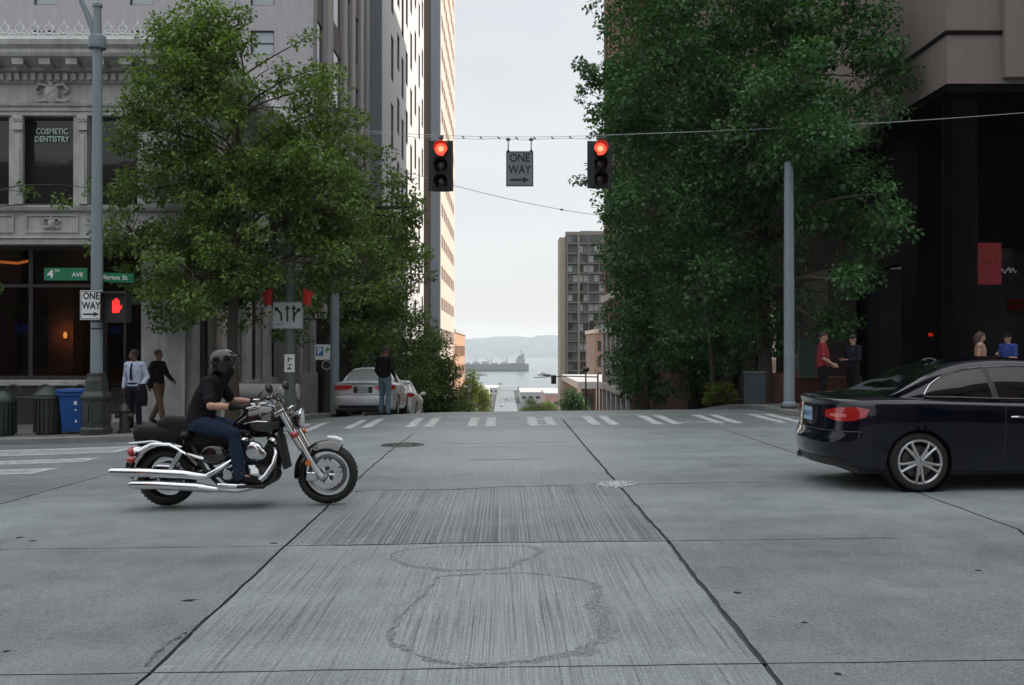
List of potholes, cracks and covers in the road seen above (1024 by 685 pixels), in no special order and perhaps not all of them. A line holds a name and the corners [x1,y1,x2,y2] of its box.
manhole cover [597,480,637,488]
